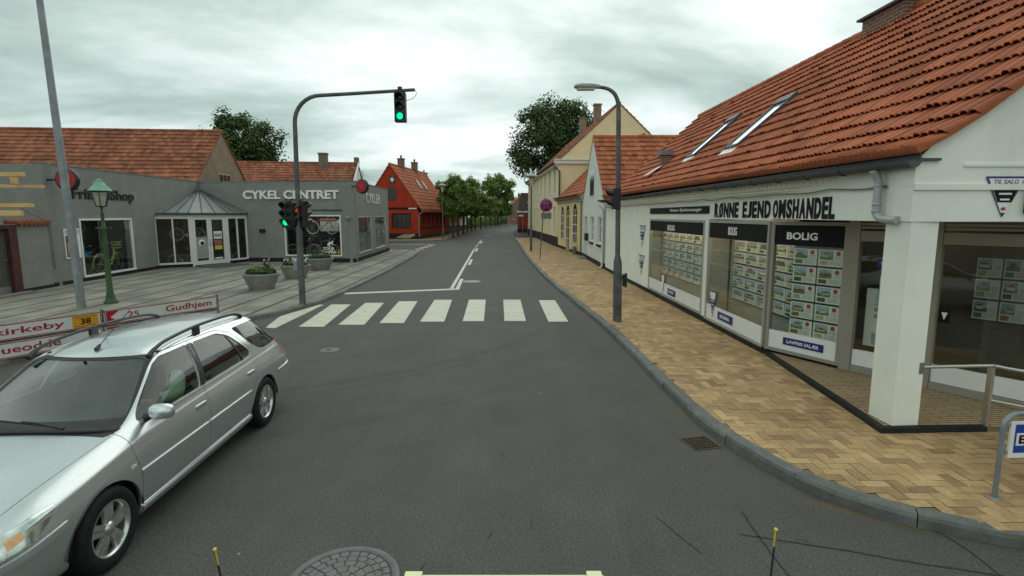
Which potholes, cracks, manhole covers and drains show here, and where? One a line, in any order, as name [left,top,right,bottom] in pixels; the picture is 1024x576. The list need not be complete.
manhole cover [291,546,400,576]
drain grate [679,435,723,451]
crack [741,511,1002,576]
